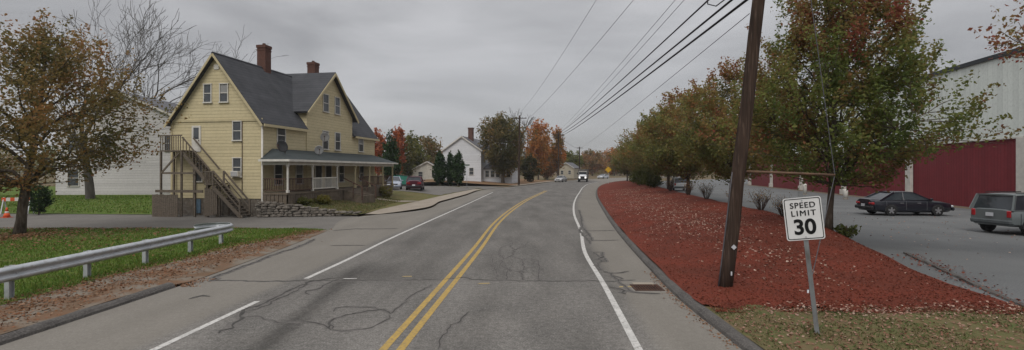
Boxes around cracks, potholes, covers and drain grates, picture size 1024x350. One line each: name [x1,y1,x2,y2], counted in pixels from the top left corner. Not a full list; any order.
crack [189,210,660,349]
drain grate [630,282,665,291]
